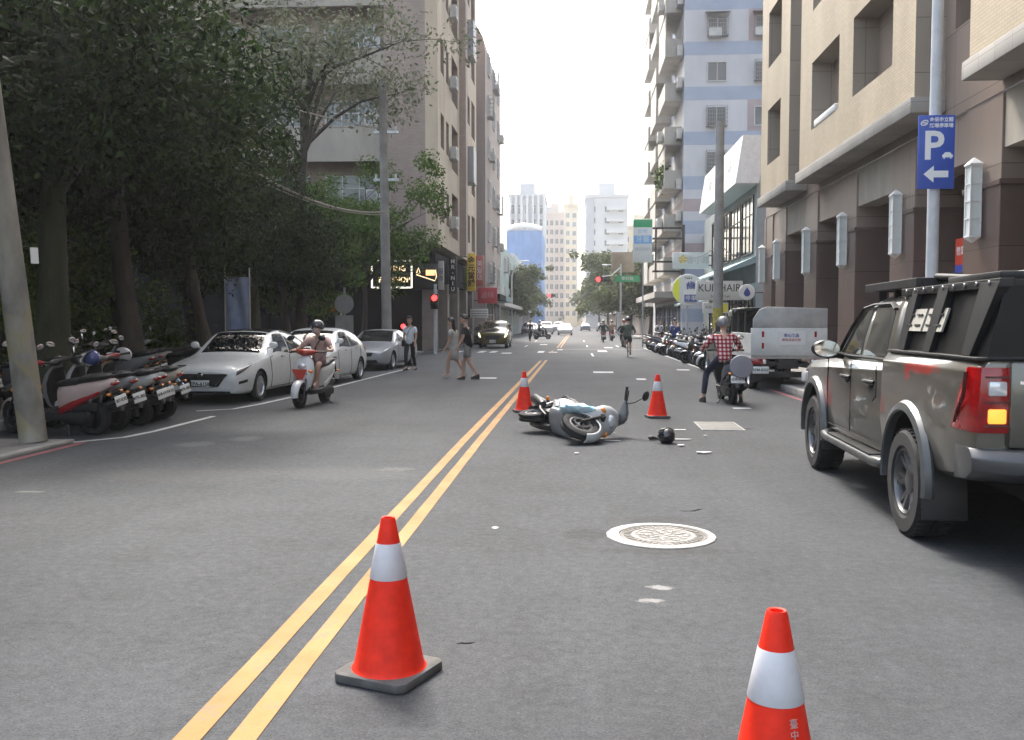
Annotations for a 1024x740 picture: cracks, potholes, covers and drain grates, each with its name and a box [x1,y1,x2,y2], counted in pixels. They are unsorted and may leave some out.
manhole cover [607,523,716,549]
manhole cover [694,422,746,431]
